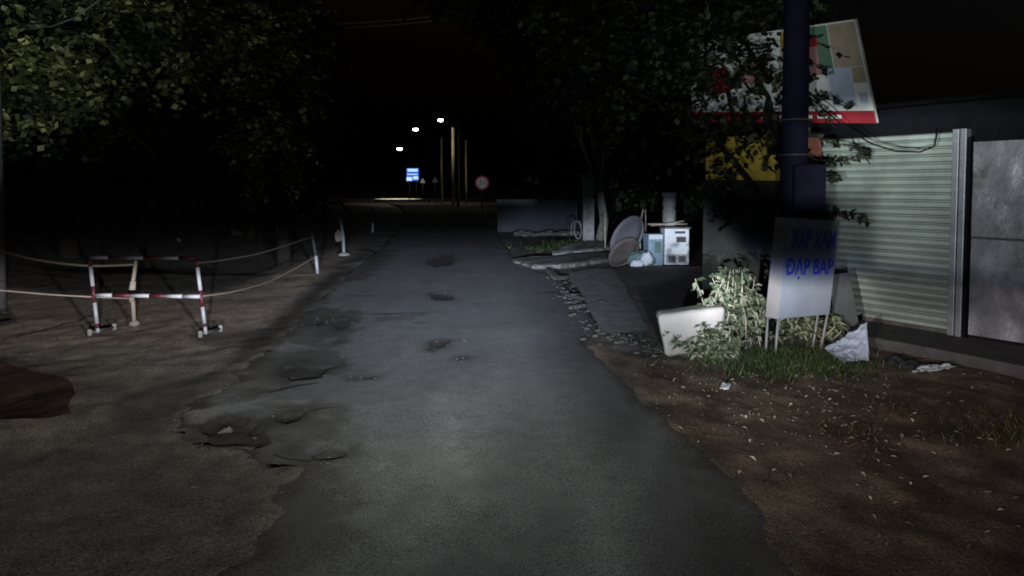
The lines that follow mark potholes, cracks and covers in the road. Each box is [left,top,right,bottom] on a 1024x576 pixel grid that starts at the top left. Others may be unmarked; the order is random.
pothole [426,254,456,268]
pothole [310,451,349,461]
pothole [429,292,454,300]
pothole [199,415,271,450]
pothole [273,410,308,425]
pothole [277,361,347,381]
pothole [425,339,453,351]
